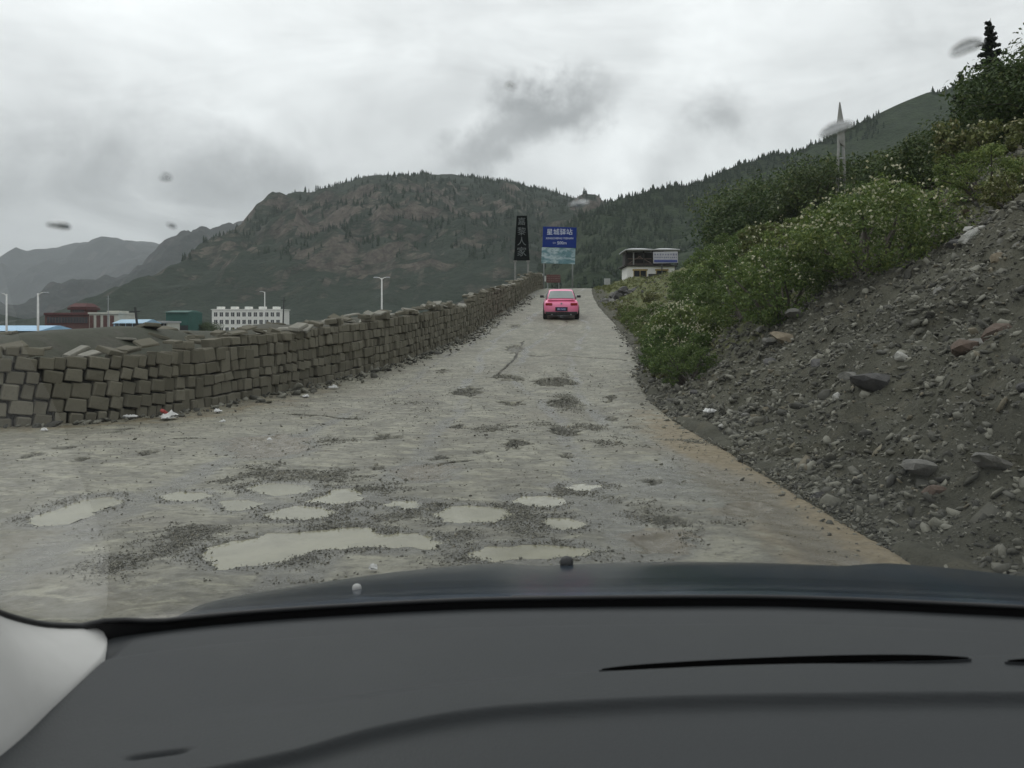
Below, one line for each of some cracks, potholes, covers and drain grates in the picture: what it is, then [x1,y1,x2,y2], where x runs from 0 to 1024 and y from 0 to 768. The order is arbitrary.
crack [495,341,635,378]
pothole [530,377,580,386]
pothole [561,482,606,491]
pothole [27,496,124,527]
pothole [201,526,450,570]
pothole [244,482,316,496]
pothole [305,487,366,505]
pothole [511,495,566,508]
pothole [467,543,610,563]
pothole [156,491,215,501]
pothole [537,517,589,530]
pothole [432,505,515,523]
